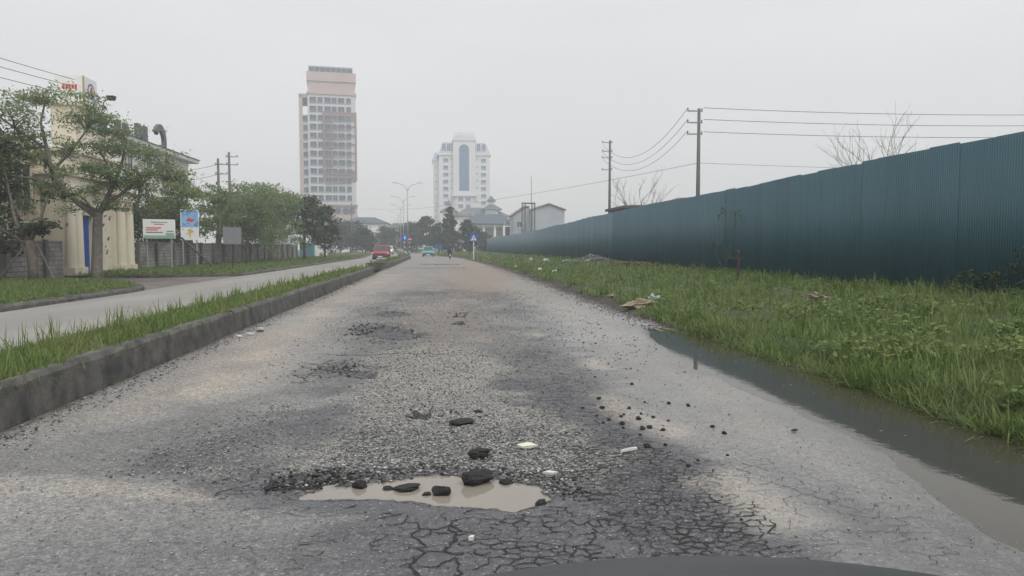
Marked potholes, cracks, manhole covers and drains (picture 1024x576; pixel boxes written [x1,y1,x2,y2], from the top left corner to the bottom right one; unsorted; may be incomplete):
pothole [355,325,432,341]
crack [343,427,956,576]
pothole [268,468,564,512]
pothole [316,363,379,379]
